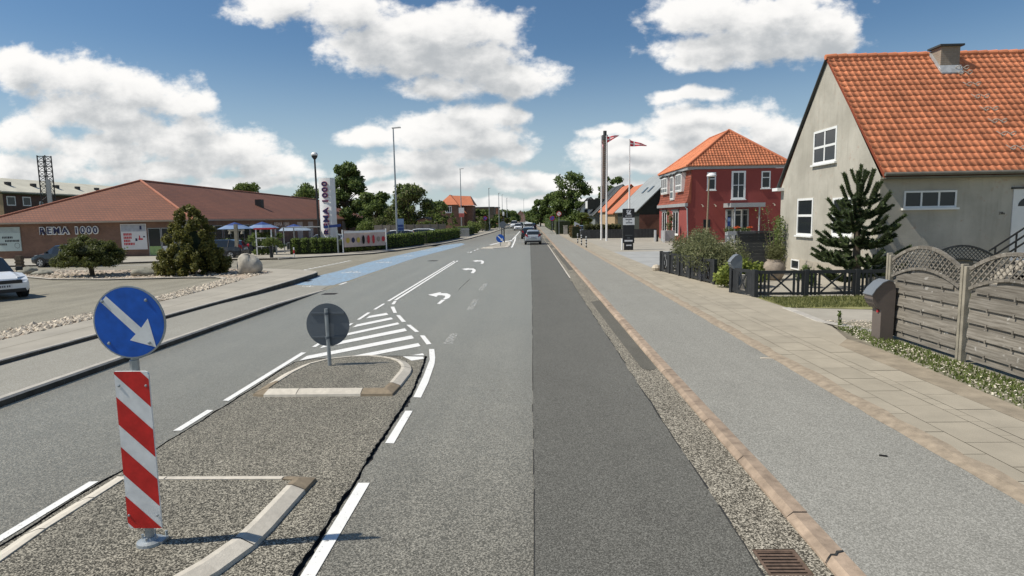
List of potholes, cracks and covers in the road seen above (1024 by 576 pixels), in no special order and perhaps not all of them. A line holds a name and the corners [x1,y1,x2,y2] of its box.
drain grate [752,549,815,576]
